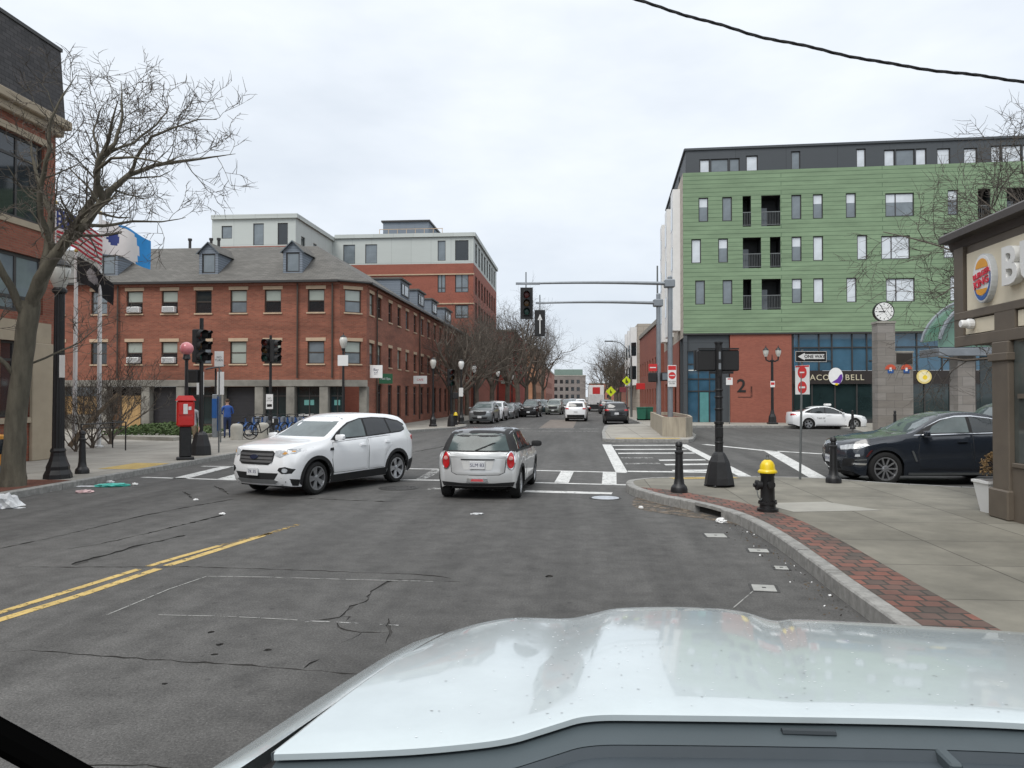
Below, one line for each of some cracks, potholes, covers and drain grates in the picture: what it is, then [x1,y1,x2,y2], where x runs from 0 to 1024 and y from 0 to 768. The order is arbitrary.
crack [64,514,456,644]
drain grate [695,502,726,517]
utility cover [748,584,781,593]
crack [9,650,352,674]
